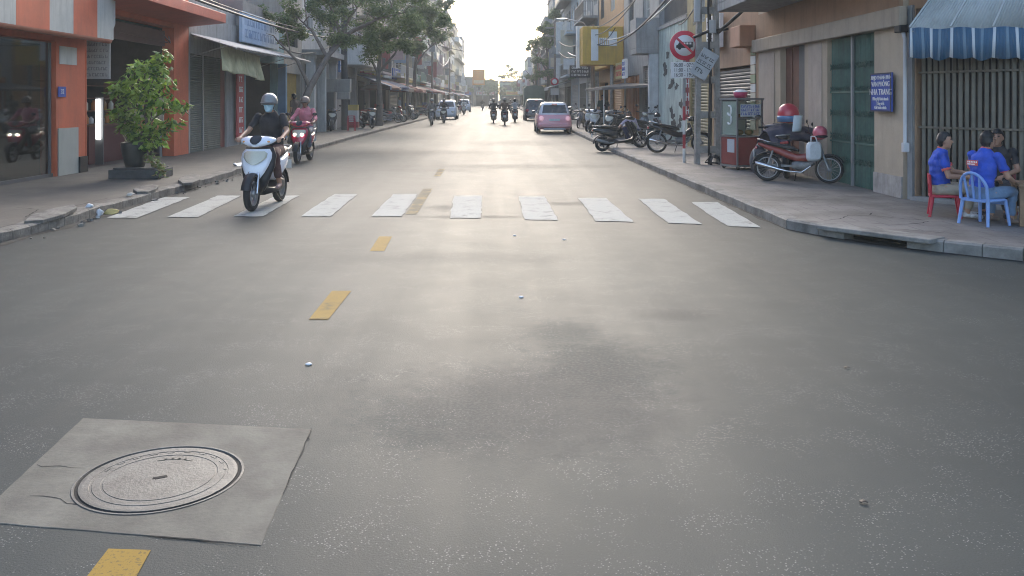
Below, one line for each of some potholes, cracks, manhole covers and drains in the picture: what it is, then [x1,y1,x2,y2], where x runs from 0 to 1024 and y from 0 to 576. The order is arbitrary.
manhole cover [0,418,311,546]
drain grate [816,223,945,244]
